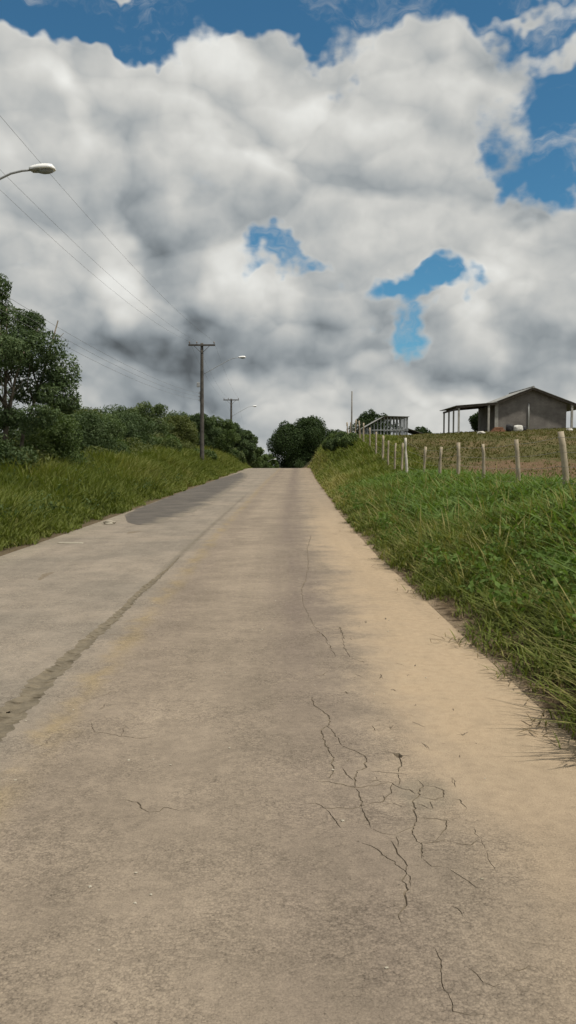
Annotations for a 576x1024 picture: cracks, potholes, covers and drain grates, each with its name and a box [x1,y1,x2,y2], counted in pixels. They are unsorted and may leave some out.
crack [72,691,148,739]
crack [300,536,496,922]
crack [435,949,533,1016]
